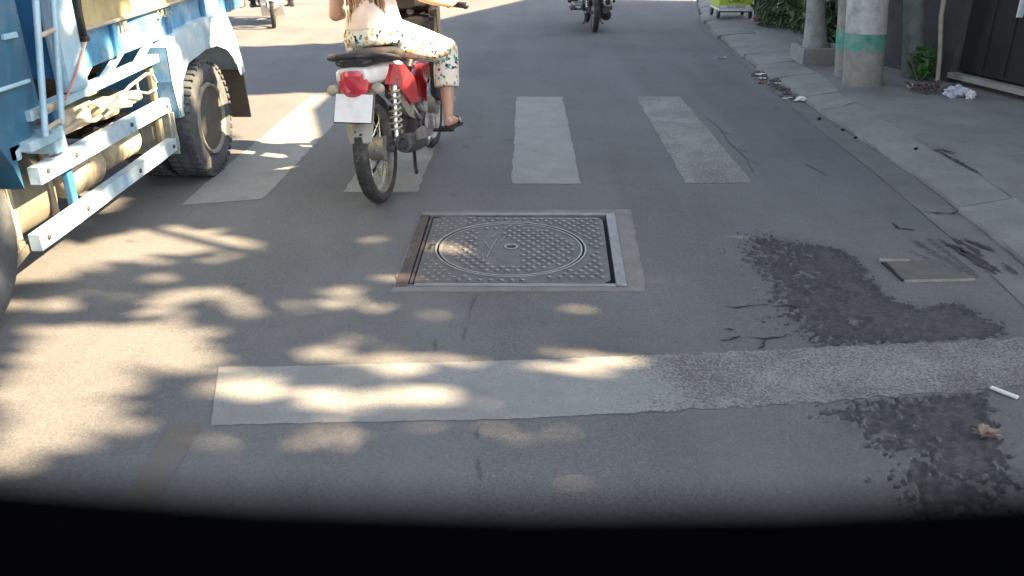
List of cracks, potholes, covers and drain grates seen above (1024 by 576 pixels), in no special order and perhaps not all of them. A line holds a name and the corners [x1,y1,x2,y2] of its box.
crack [433,294,482,480]
crack [724,328,787,349]
crack [703,115,762,173]
manhole cover [390,209,646,292]
